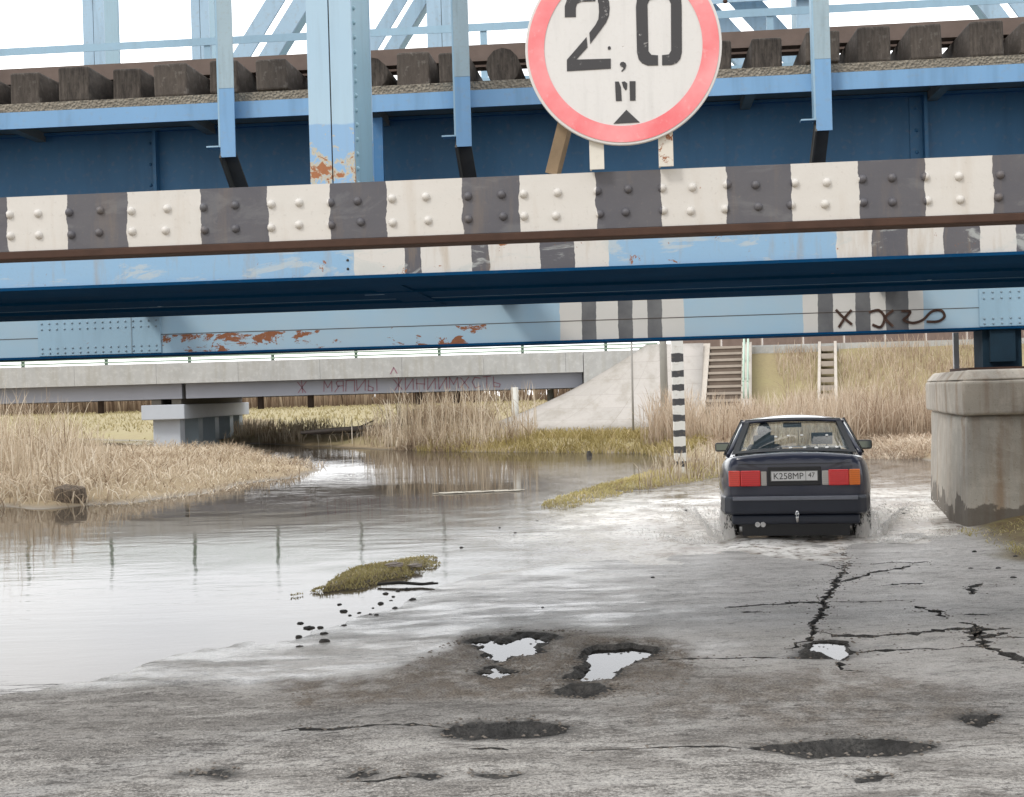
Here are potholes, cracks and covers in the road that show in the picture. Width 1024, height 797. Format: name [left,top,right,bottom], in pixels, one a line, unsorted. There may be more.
crack [653,547,1024,672]
pothole [554,683,617,698]
crack [281,723,443,731]
pothole [441,721,570,741]
pothole [473,665,520,679]
pothole [562,642,661,681]
pothole [958,714,1000,728]
pothole [789,640,856,661]
pothole [854,775,891,783]
pothole [747,738,937,759]
pothole [463,632,564,663]
